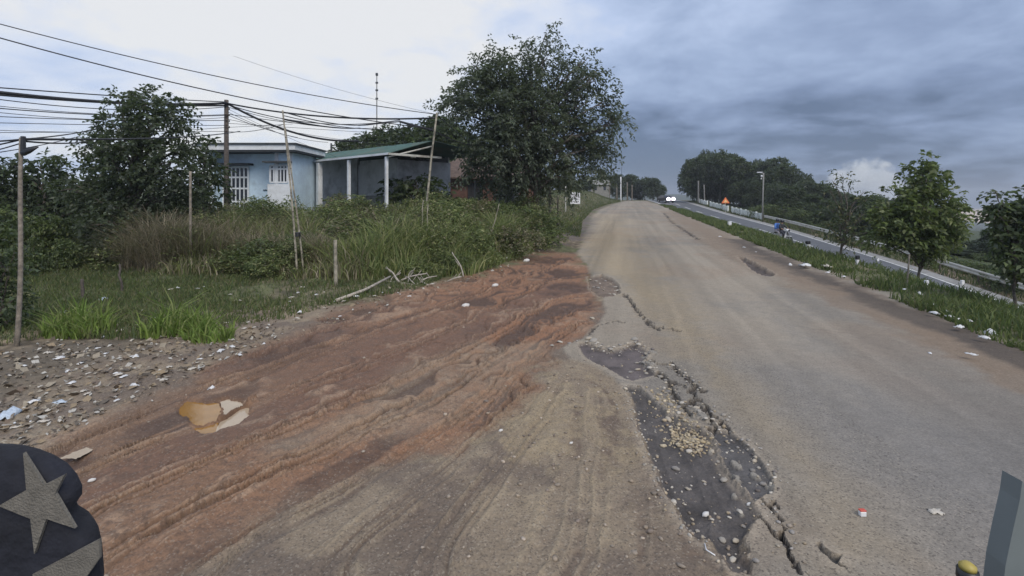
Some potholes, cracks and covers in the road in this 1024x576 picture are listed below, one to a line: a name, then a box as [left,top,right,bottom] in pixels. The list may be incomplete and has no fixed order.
crack [755,497,804,575]
pothole [736,256,776,277]
pothole [622,383,762,576]
crack [663,213,701,240]
pothole [587,274,621,298]
crack [585,292,682,336]
pothole [711,429,775,502]
